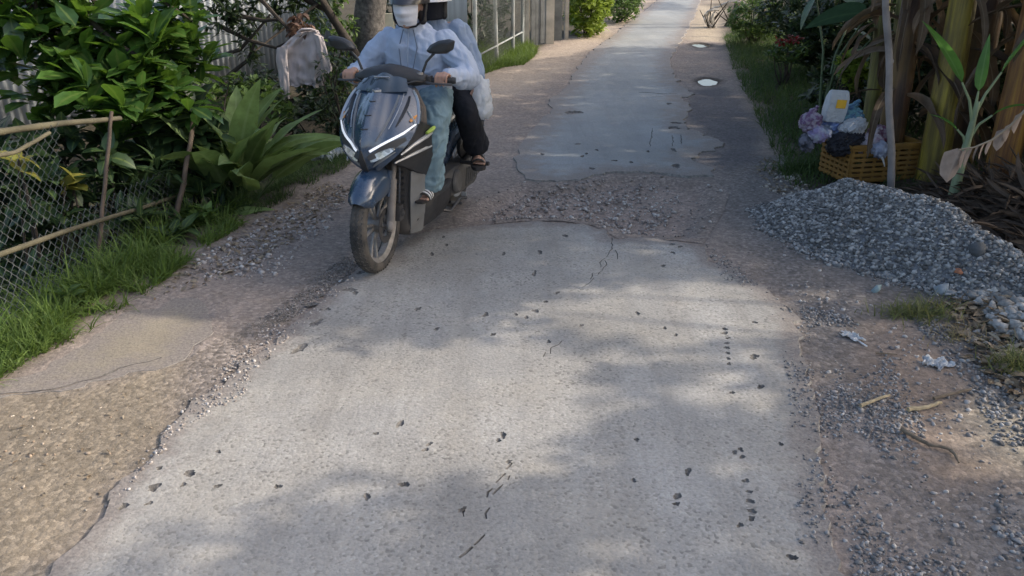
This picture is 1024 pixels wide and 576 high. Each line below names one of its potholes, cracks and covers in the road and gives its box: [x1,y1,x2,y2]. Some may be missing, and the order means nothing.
crack [0,357,161,394]
pothole [453,174,729,244]
crack [583,238,618,287]
